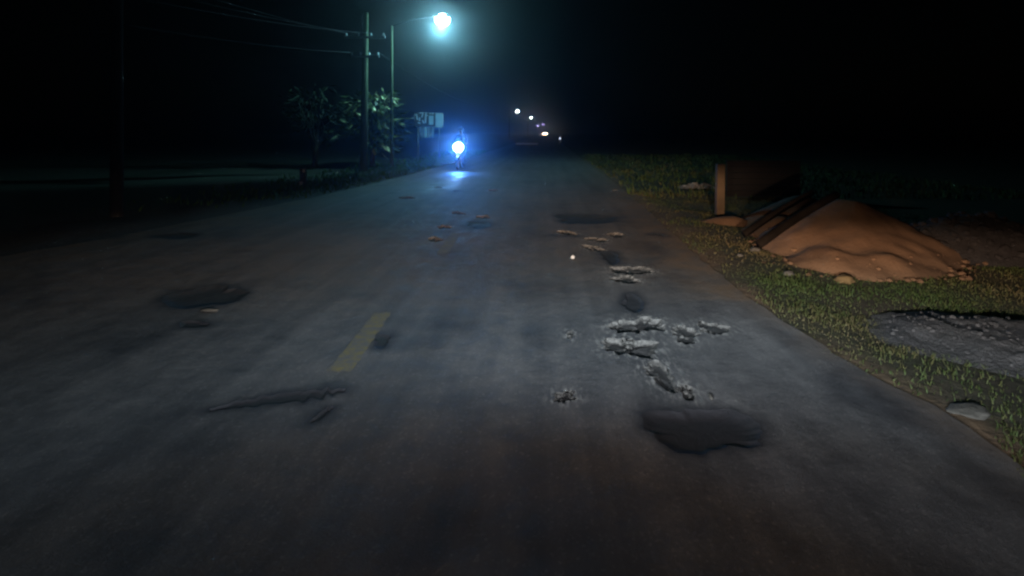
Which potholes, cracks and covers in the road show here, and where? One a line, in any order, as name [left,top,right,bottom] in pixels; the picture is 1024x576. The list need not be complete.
pothole [556,214,617,224]
crack [210,387,346,423]
pothole [610,266,654,275]
pothole [374,334,391,349]
pothole [467,221,490,229]
pothole [606,316,667,334]
